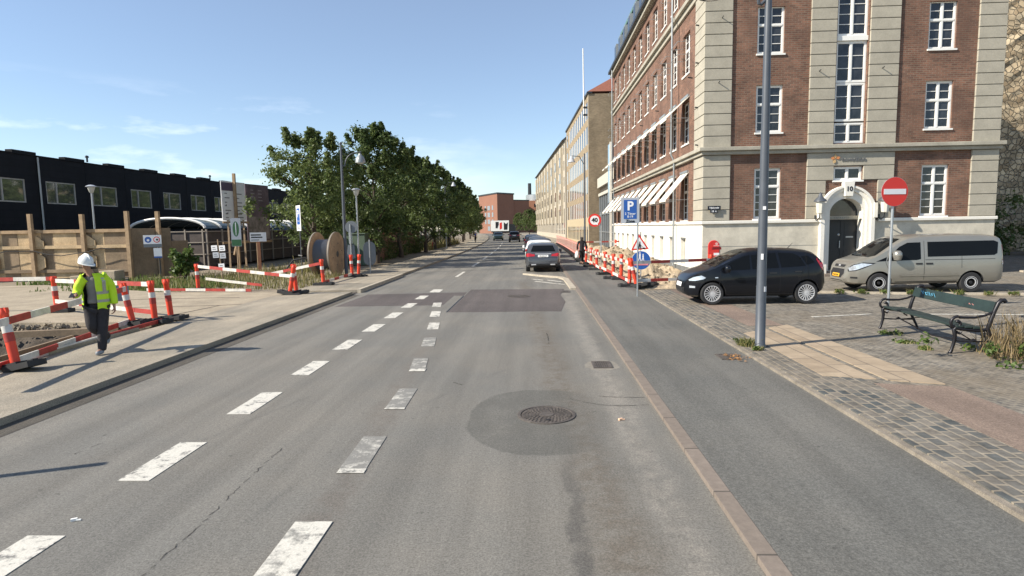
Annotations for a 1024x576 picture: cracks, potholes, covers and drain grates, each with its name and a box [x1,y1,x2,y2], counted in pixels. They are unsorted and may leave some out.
manhole cover [518,406,576,424]
crack [142,448,282,576]
